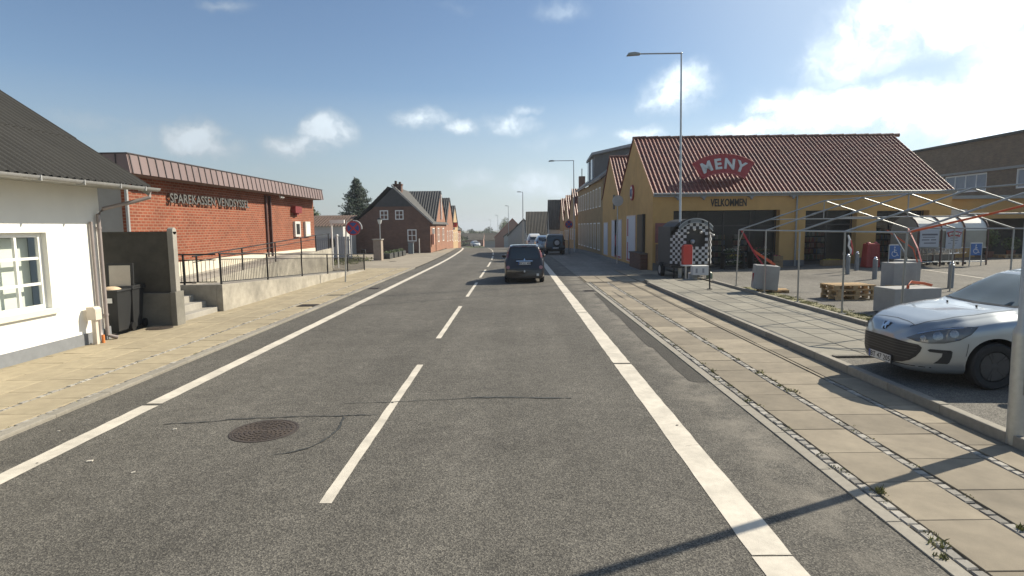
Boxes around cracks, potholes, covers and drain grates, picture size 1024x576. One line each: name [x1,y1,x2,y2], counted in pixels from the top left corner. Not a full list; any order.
manhole cover [228,419,300,443]
